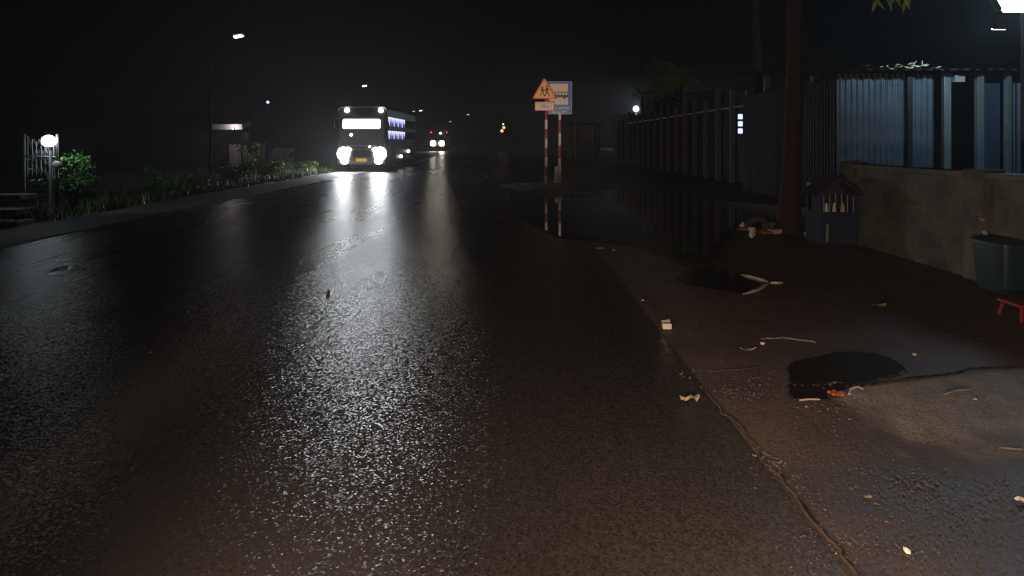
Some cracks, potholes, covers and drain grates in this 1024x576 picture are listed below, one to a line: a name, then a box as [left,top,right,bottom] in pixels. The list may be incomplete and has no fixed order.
pothole [784,350,909,402]
crack [705,389,860,576]
crack [851,365,1024,387]
pothole [674,267,783,295]
